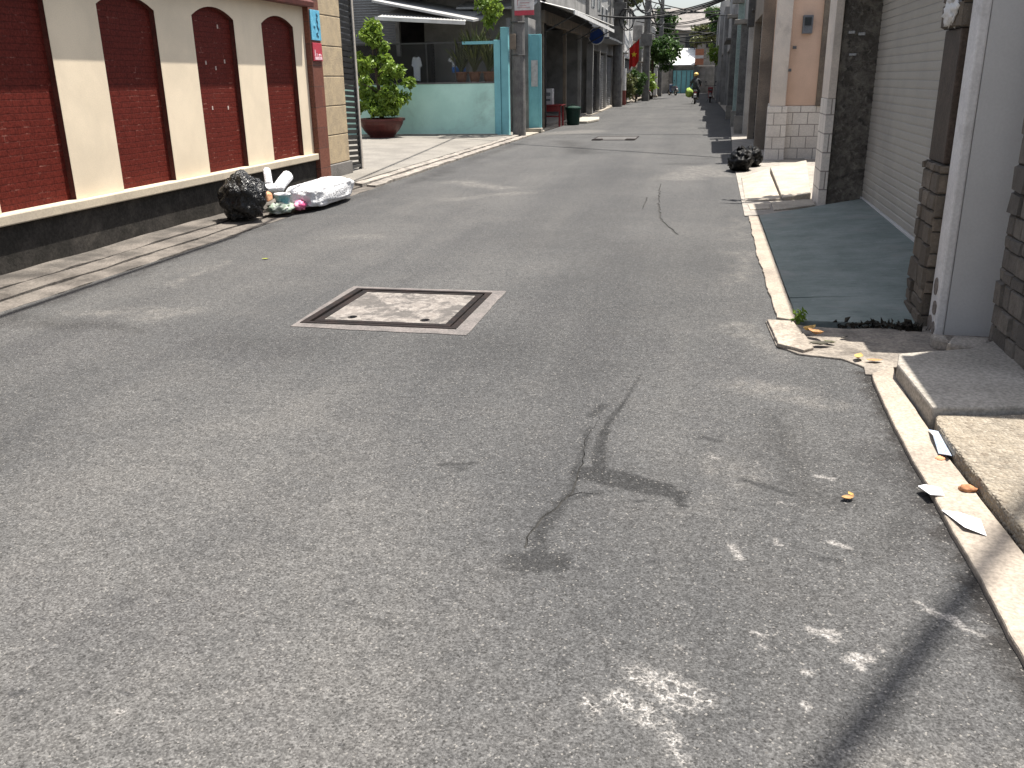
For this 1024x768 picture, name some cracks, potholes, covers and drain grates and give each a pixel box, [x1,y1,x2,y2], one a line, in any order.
crack [524,417,600,548]
manhole cover [290,286,506,336]
crack [642,184,679,235]
